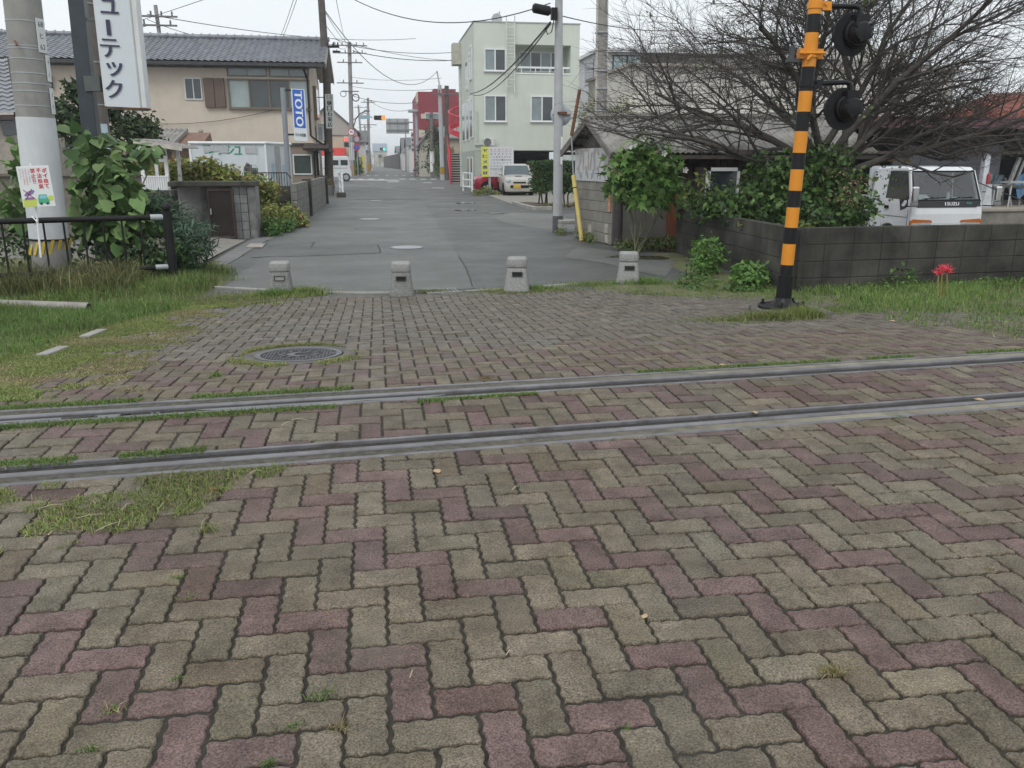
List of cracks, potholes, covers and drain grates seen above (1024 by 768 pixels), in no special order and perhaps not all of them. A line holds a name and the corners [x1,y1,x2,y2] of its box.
manhole cover [242,346,356,365]
